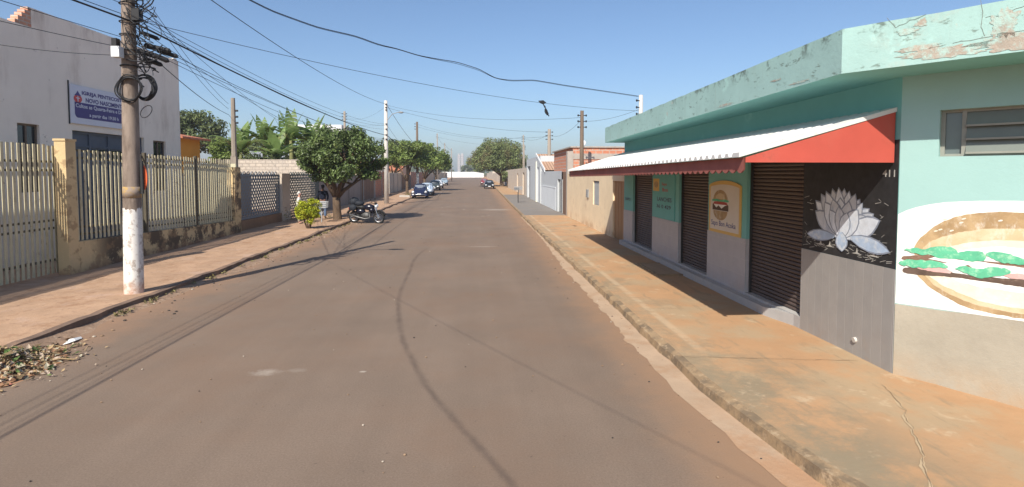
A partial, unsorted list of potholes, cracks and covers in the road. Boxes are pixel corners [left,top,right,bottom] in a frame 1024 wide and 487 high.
crack [882,385,933,487]
